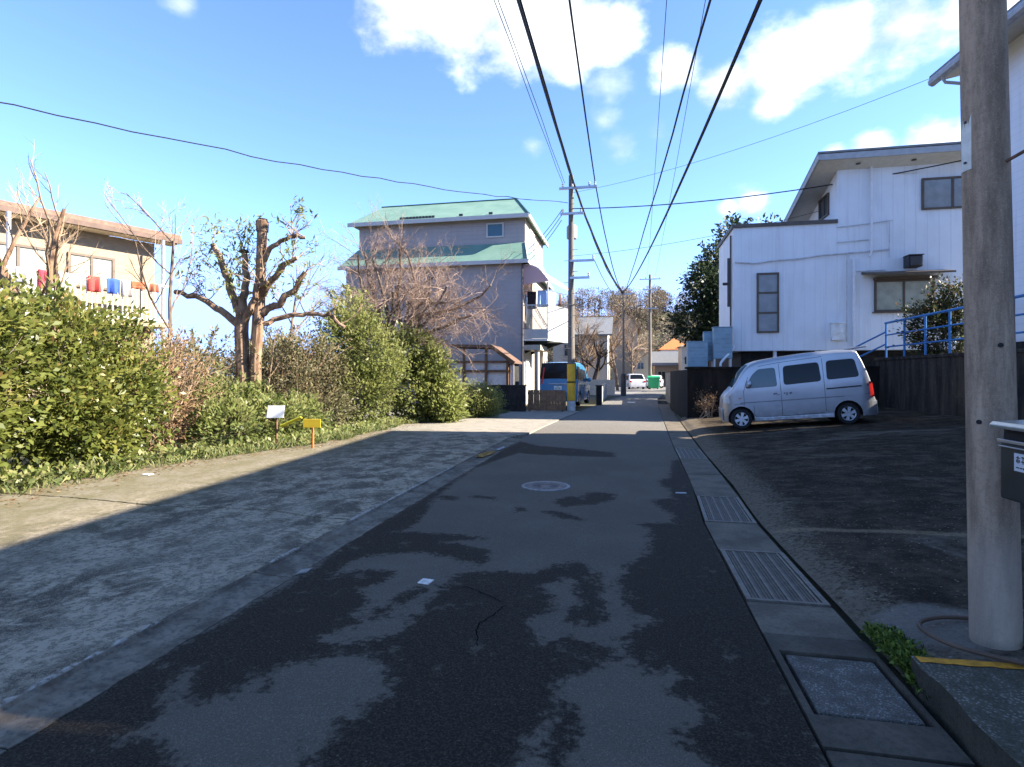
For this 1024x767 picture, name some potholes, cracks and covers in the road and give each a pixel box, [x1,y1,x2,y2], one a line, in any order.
drain grate [720,549,831,608]
crack [431,583,507,646]
drain grate [697,495,757,524]
drain grate [675,448,708,460]
manhole cover [521,481,570,491]
